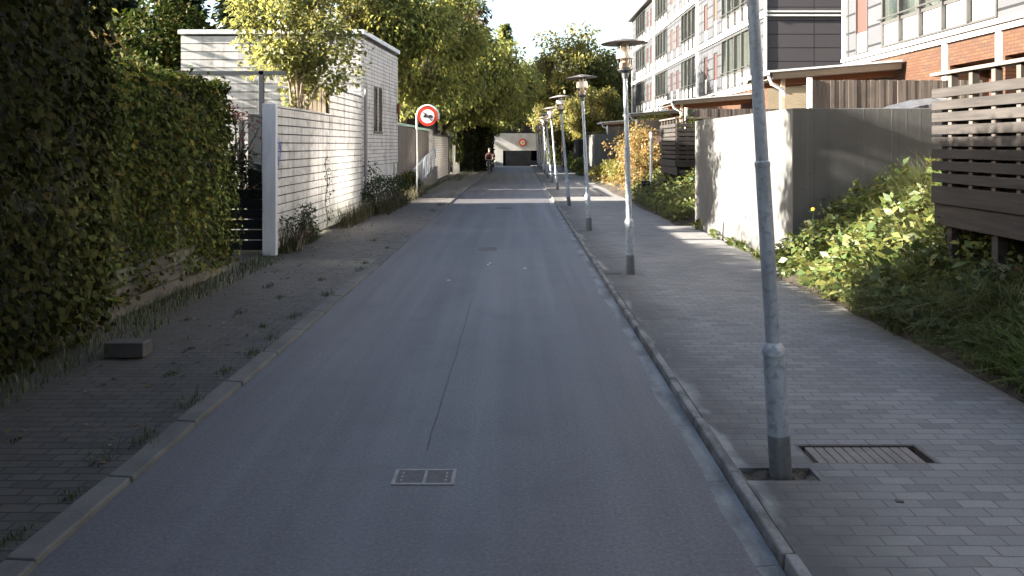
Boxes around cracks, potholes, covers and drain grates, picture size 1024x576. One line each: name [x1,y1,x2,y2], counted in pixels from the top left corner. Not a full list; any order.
manhole cover [391,469,457,485]
